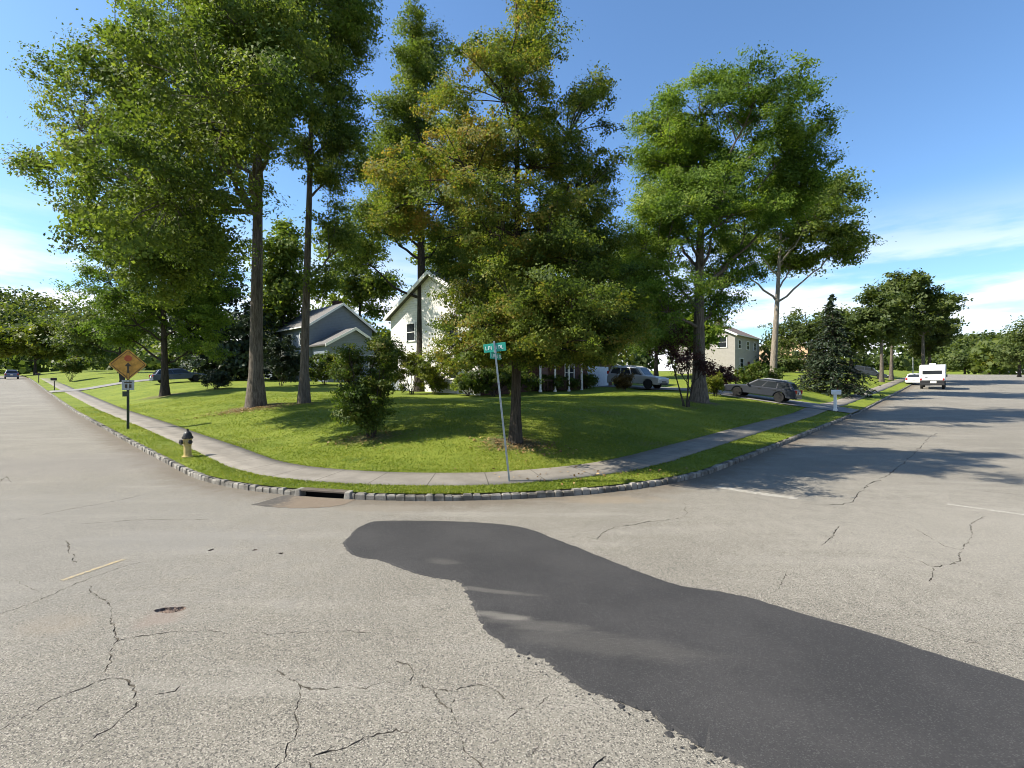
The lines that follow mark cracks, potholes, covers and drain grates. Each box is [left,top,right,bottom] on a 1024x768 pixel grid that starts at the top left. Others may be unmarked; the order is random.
crack [903,517,982,581]
crack [831,433,937,505]
crack [275,661,549,768]
crack [0,562,186,752]
drain grate [251,487,356,508]
